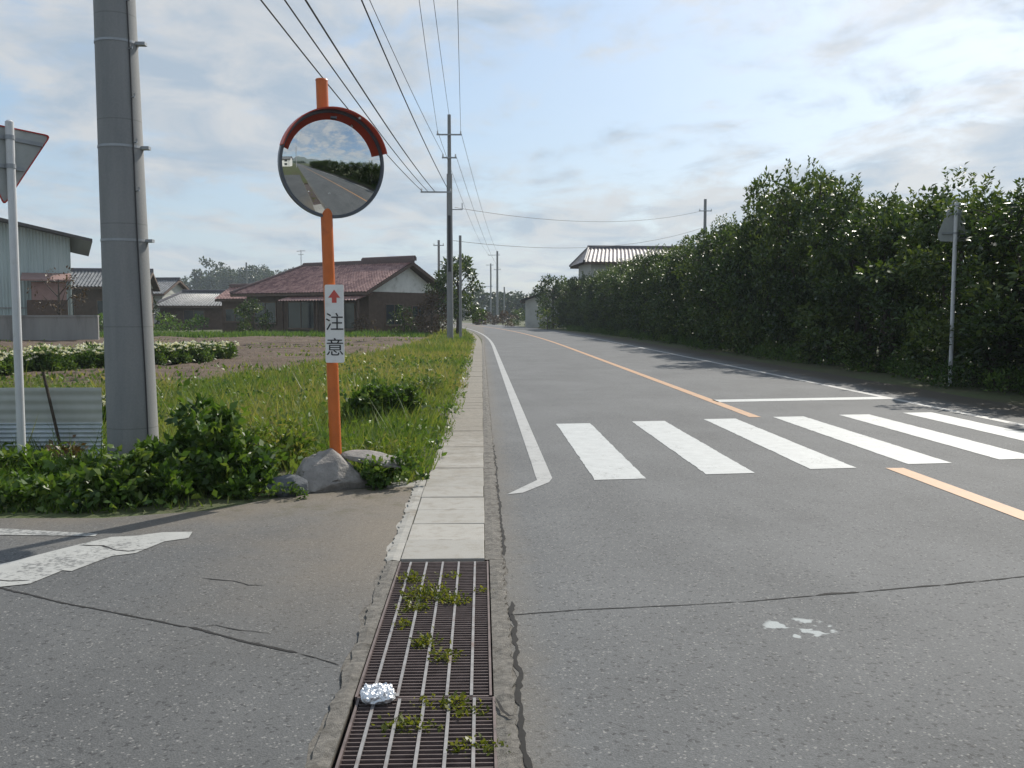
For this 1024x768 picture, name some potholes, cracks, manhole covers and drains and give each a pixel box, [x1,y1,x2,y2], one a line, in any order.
crack [496,576,1024,768]
drain grate [335,696,498,768]
crack [0,580,338,665]
drain grate [355,561,492,704]
